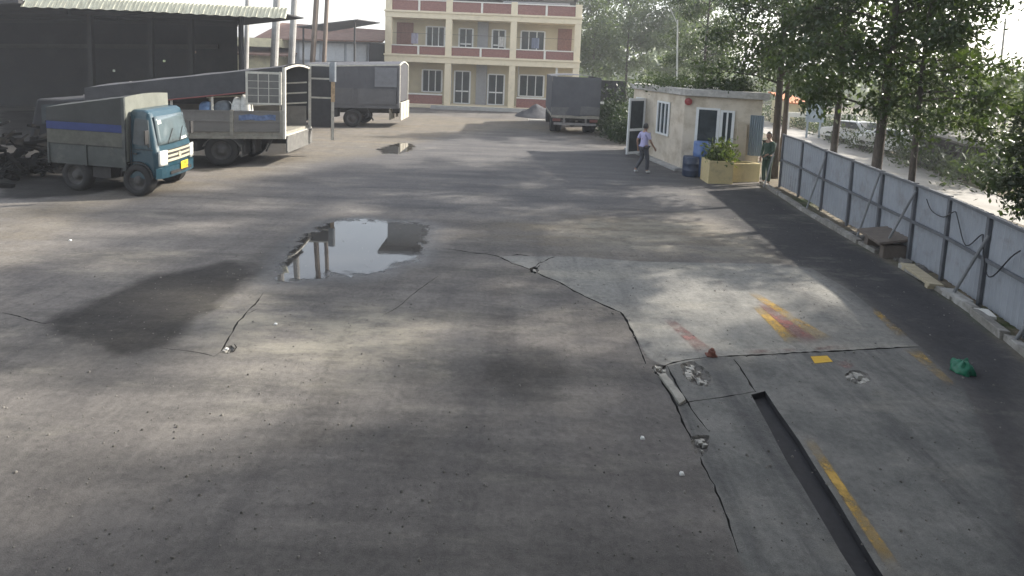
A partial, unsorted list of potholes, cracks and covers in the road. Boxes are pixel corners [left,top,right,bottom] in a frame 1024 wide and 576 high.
crack [164,295,262,356]
pothole [680,361,714,387]
crack [451,249,904,553]
pothole [691,435,710,456]
pothole [845,370,871,384]
